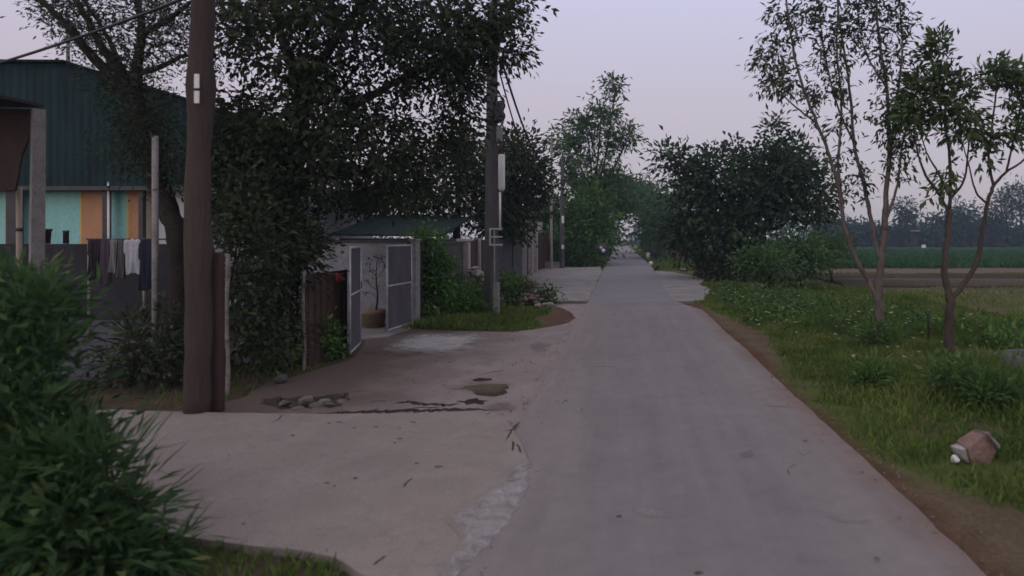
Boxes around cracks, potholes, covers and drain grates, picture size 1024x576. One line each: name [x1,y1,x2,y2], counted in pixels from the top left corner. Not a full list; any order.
crack [326,400,523,454]
pothole [259,392,351,410]
pothole [461,384,509,397]
